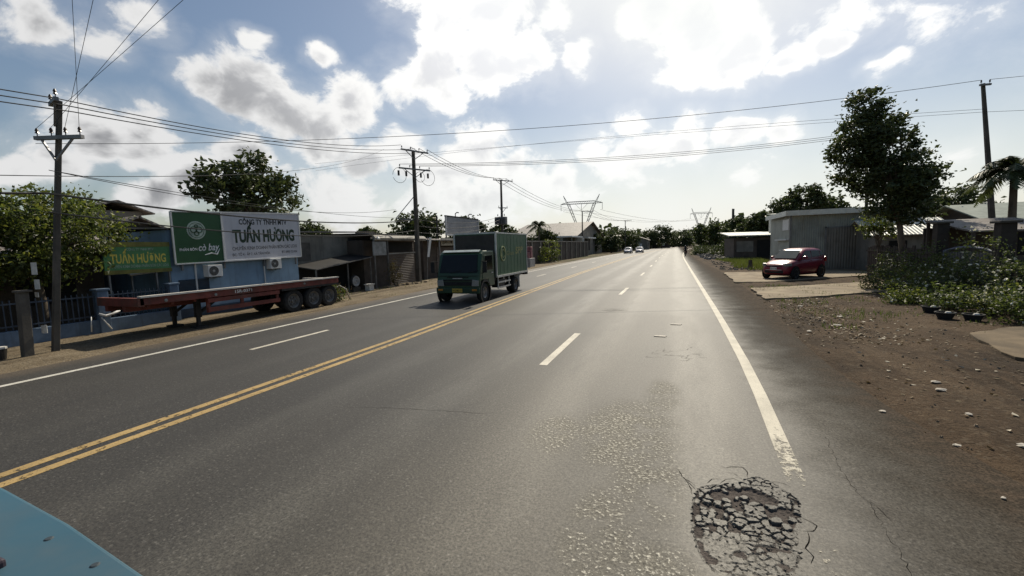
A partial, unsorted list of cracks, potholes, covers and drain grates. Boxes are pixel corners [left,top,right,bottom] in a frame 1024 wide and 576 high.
pothole [690,476,803,576]
